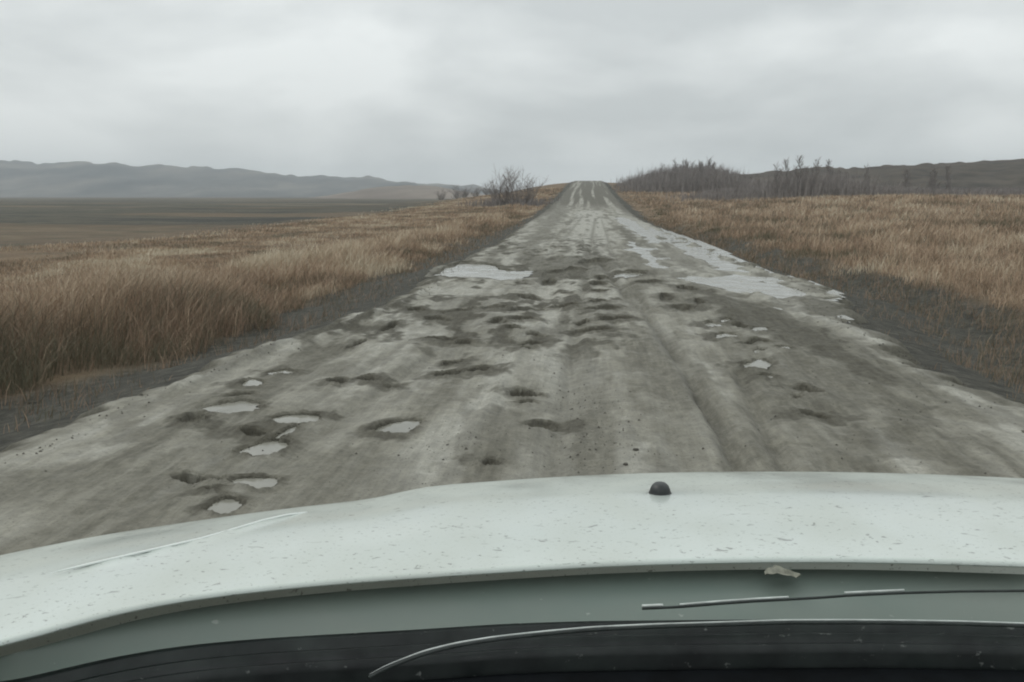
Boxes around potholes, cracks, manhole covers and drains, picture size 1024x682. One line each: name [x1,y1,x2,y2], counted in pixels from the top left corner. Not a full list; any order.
pothole [426,369,473,379]
pothole [231,377,274,389]
pothole [222,434,304,462]
pothole [220,472,293,493]
pothole [511,418,571,437]
pothole [785,382,830,399]
pothole [317,376,353,387]
pothole [260,409,332,427]
